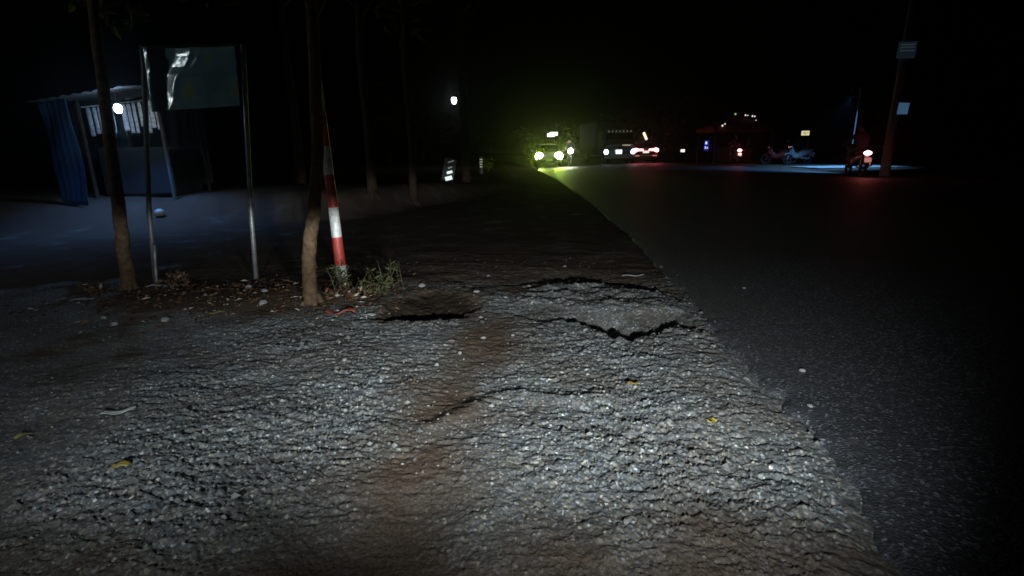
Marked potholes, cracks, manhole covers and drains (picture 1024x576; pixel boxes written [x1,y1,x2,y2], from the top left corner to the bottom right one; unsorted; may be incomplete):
pothole [366,288,489,325]
